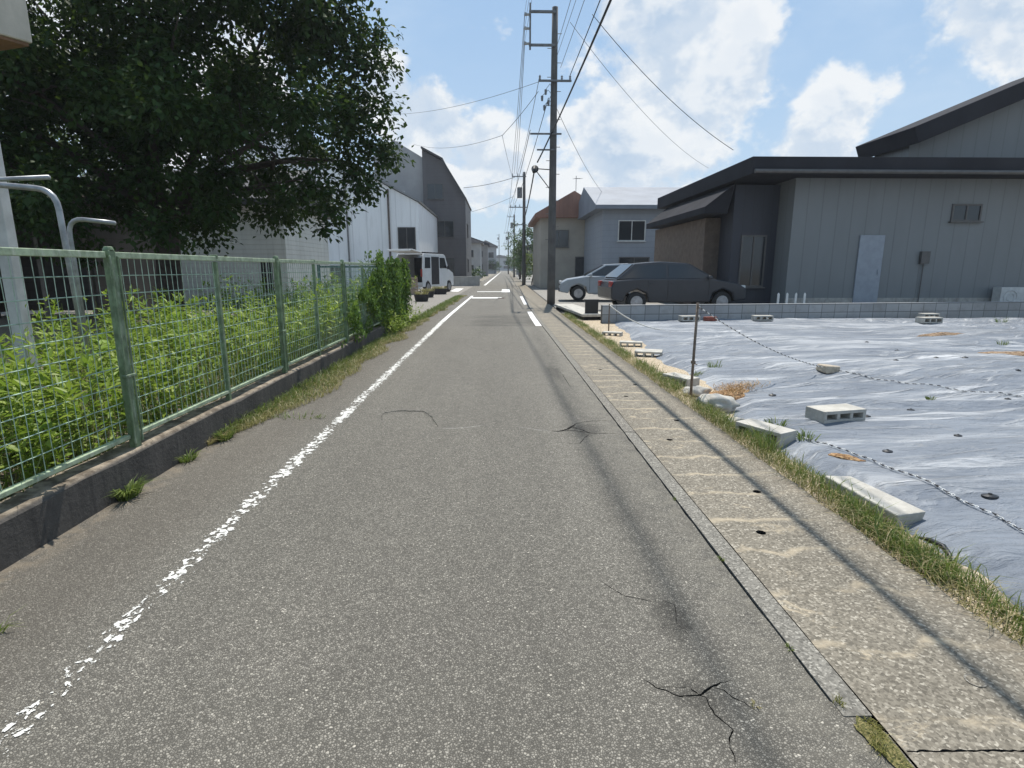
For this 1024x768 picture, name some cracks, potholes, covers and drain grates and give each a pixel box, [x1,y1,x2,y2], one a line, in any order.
crack [643,679,756,763]
crack [605,584,693,640]
crack [519,421,605,444]
